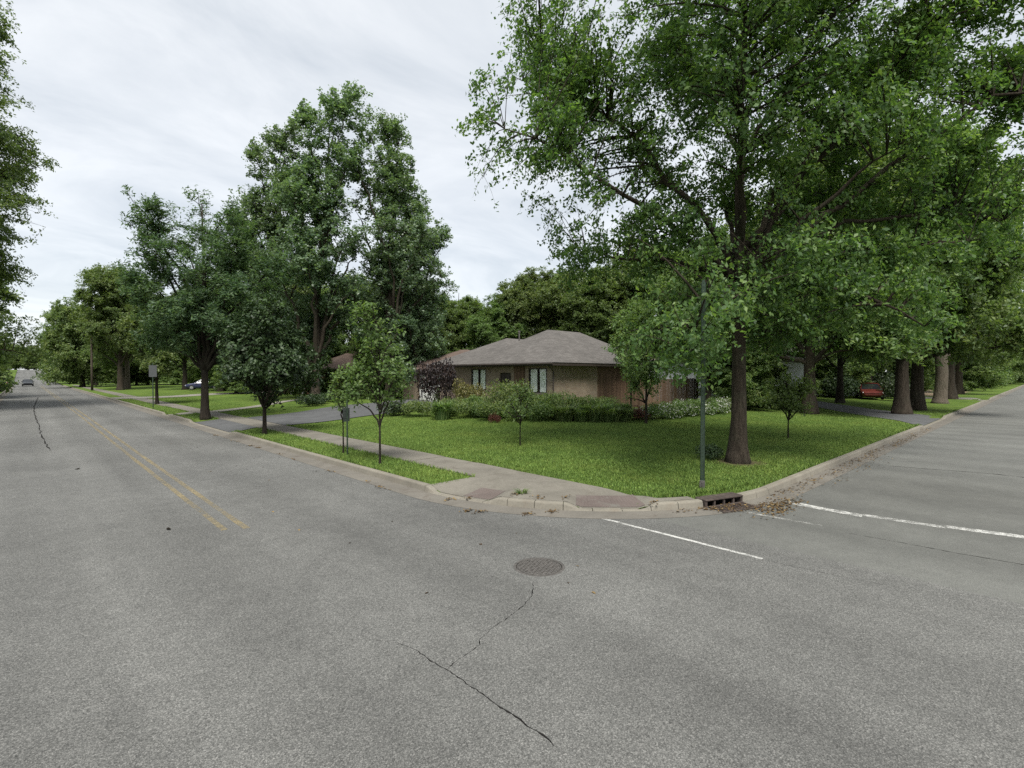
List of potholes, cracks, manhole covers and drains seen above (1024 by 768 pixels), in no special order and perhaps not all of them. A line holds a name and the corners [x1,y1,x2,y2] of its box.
crack [33,398,50,449]
manhole cover [514,557,565,577]
drain grate [695,492,761,513]
crack [378,583,554,746]
